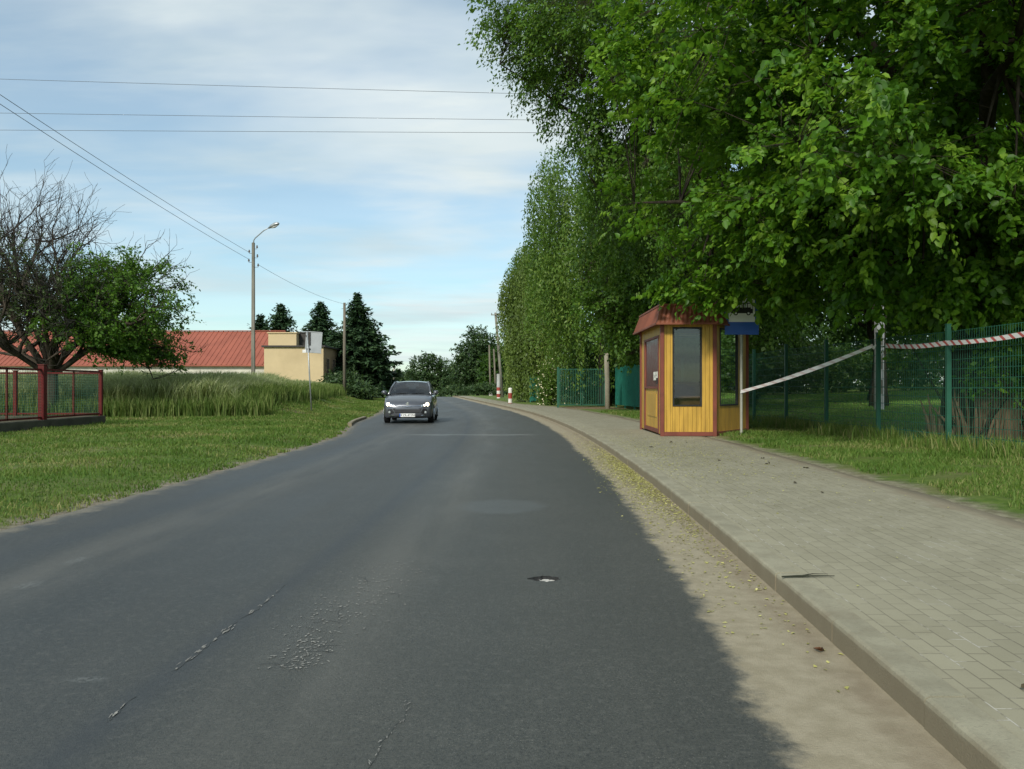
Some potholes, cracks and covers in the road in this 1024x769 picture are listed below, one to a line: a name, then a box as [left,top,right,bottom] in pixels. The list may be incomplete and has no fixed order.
crack [257,561,431,669]
crack [109,585,284,720]
crack [368,700,410,767]
